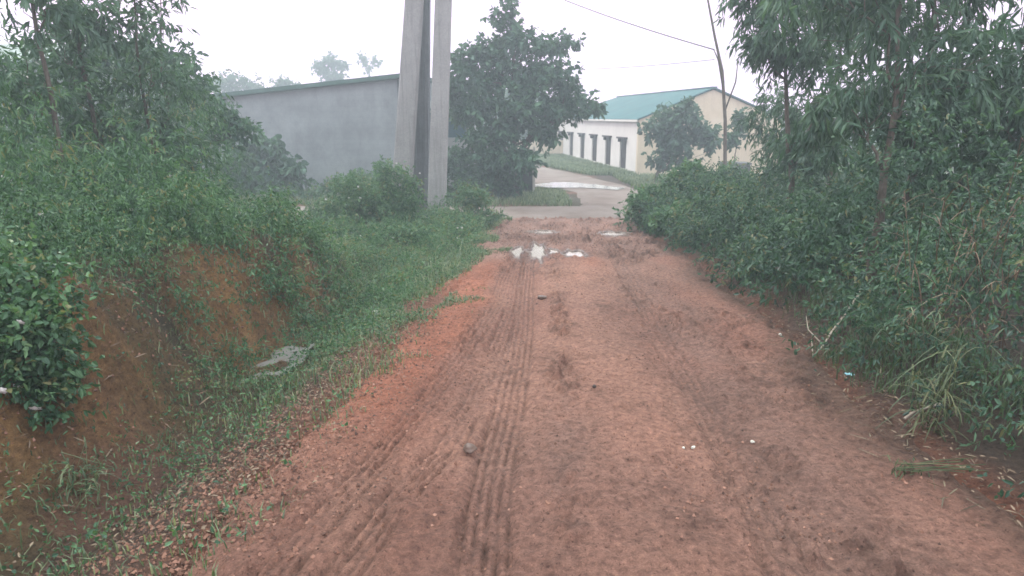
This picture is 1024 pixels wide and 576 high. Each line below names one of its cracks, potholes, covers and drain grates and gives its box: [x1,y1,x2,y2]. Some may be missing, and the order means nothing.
pothole [525,241,548,264]
pothole [509,246,525,260]
pothole [560,248,589,257]
